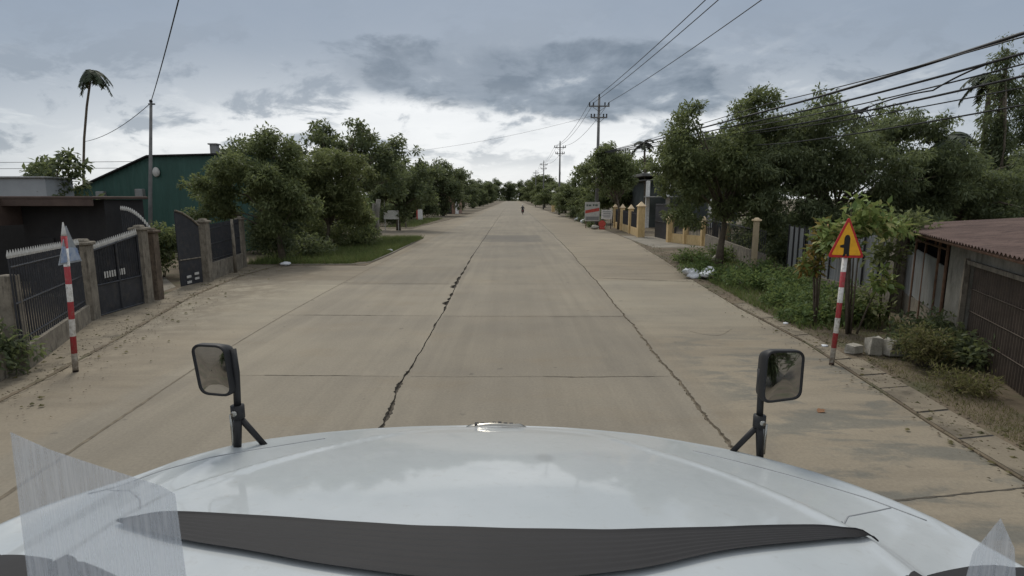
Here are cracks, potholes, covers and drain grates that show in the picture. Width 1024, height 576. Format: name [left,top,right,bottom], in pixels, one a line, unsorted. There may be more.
crack [0,228,451,500]
crack [378,210,653,428]
